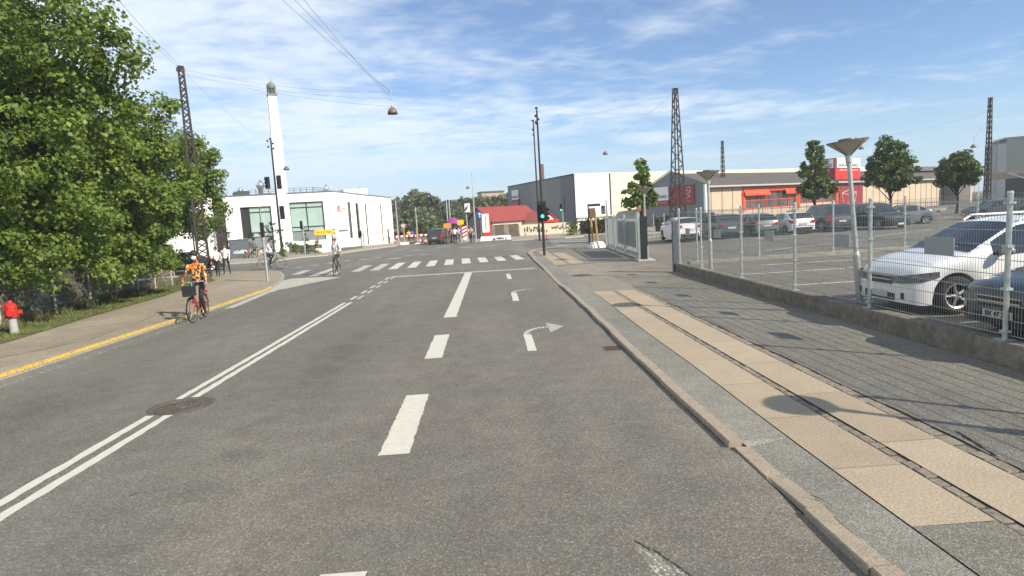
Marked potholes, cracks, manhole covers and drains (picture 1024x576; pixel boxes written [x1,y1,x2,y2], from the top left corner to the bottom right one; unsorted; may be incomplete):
manhole cover [146,397,216,416]
